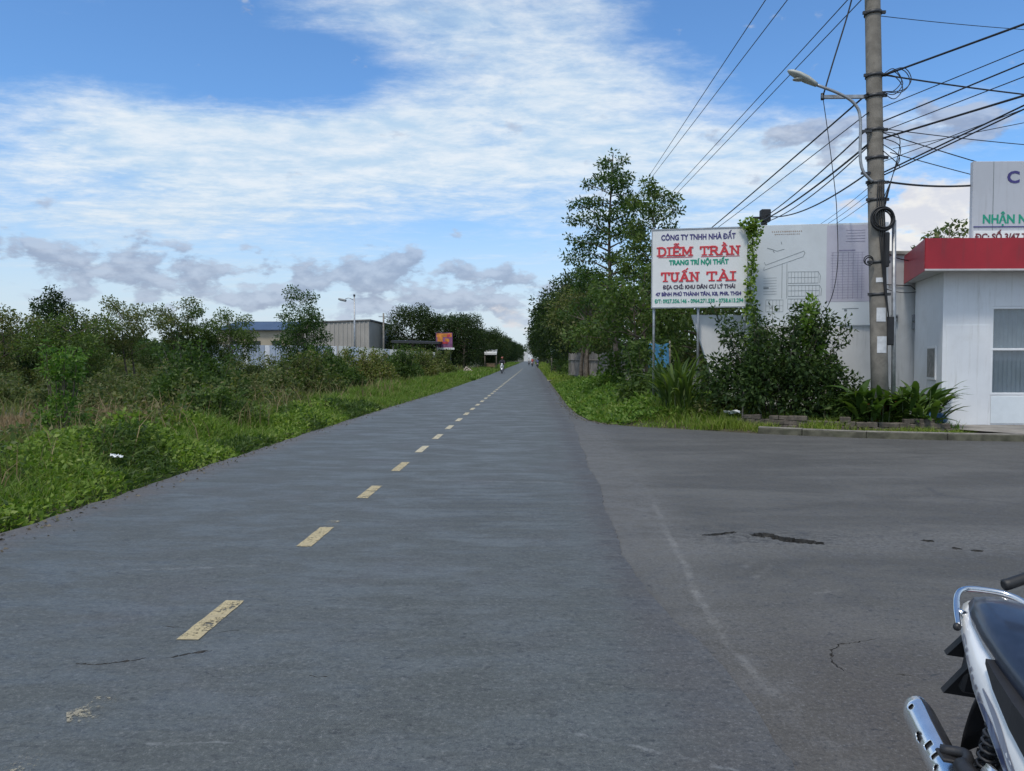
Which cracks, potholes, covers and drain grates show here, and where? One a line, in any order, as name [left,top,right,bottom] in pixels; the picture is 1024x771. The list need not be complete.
crack [829,639,873,671]
crack [166,650,207,658]
